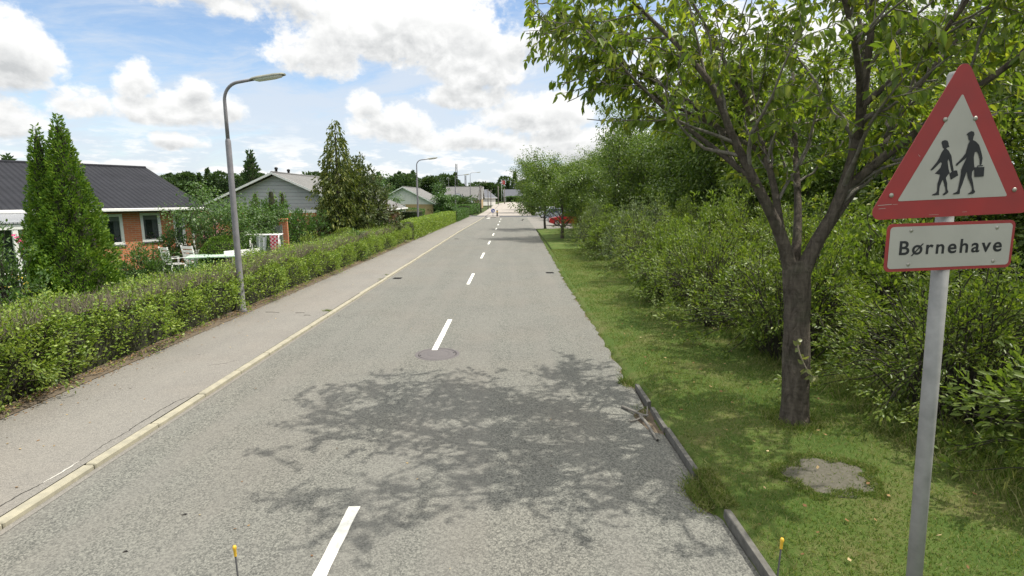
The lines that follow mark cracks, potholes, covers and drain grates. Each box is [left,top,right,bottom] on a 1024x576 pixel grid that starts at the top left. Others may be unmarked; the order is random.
manhole cover [415,348,459,361]
